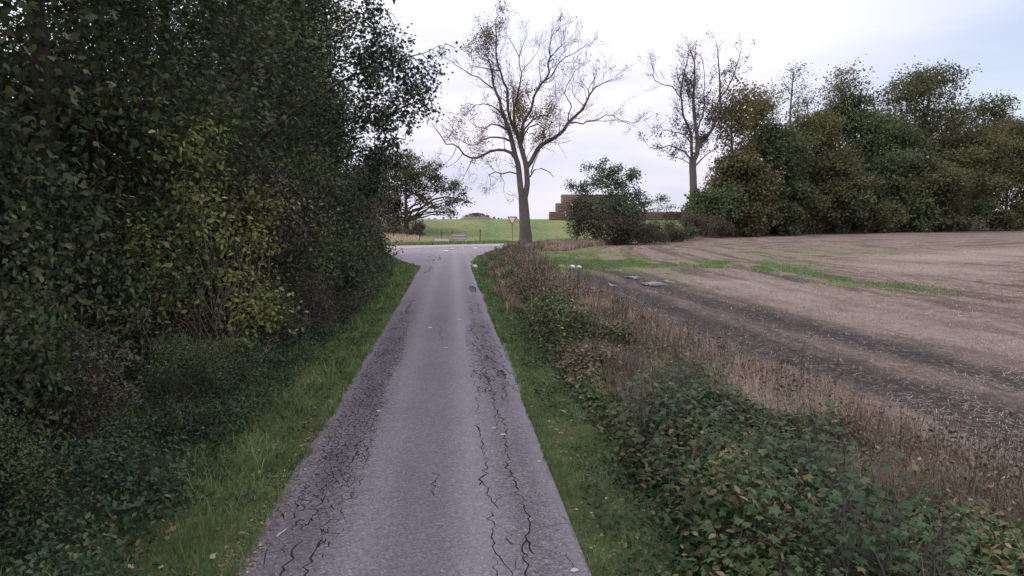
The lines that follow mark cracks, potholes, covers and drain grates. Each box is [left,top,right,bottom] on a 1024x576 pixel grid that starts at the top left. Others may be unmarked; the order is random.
crack [262,309,413,576]
crack [463,302,566,576]
